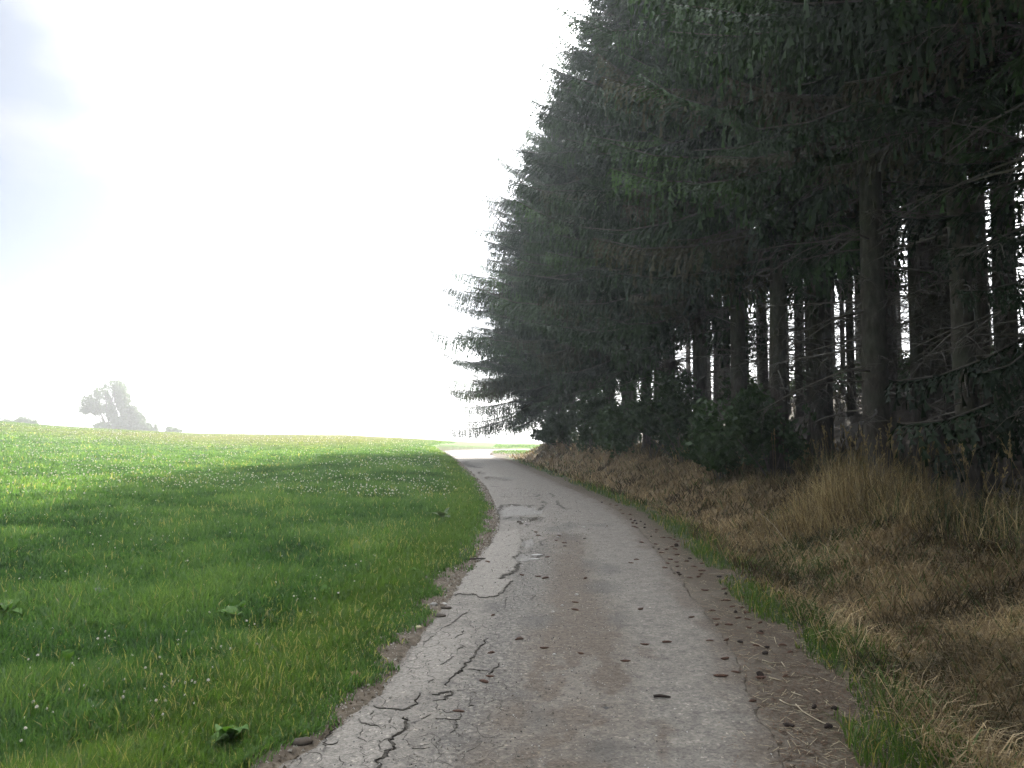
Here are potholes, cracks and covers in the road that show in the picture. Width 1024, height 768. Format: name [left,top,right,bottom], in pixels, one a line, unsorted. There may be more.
crack [292,536,551,768]
